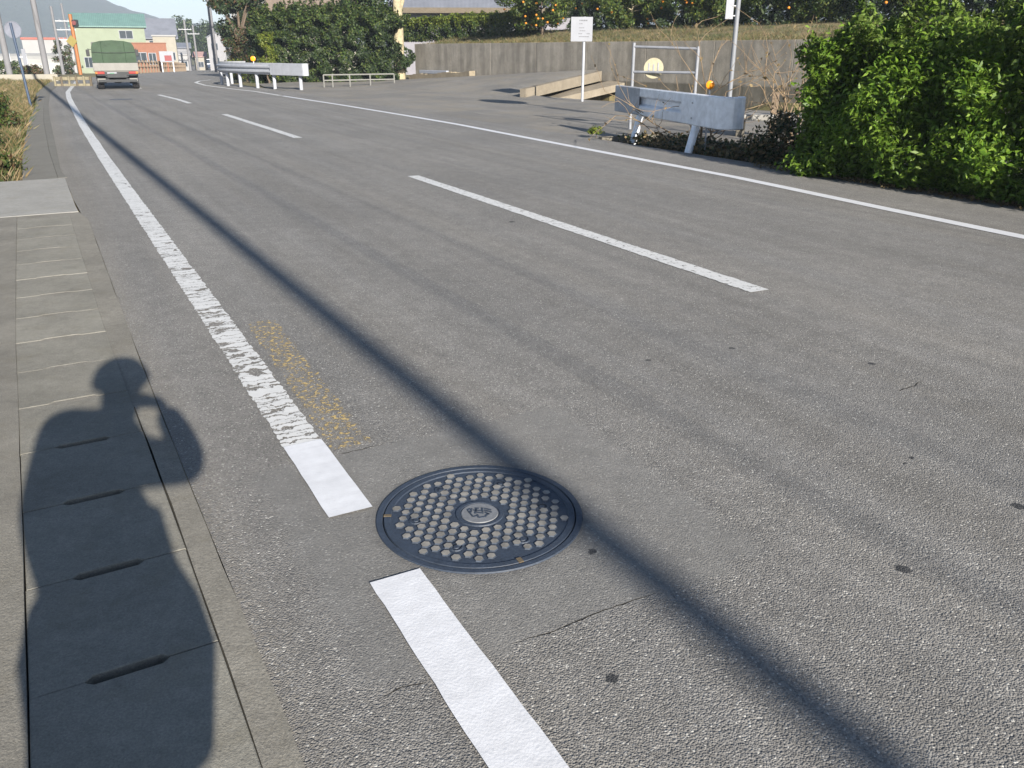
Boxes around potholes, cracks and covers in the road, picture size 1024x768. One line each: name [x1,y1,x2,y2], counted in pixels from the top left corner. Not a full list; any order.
manhole cover [376,465,583,574]
crack [508,593,654,645]
